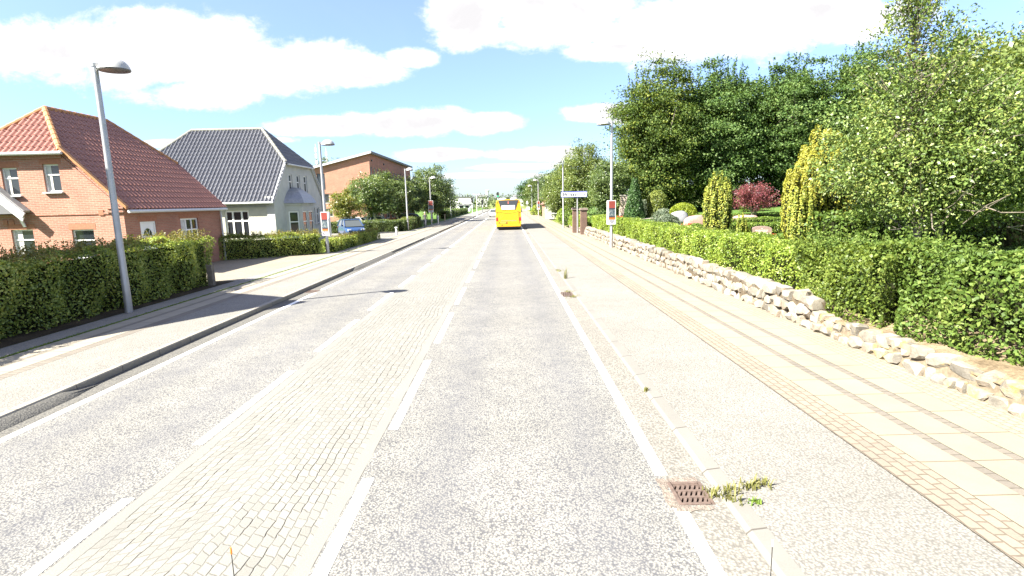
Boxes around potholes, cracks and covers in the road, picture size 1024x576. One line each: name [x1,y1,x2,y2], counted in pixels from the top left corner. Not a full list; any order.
drain grate [667,481,716,505]
